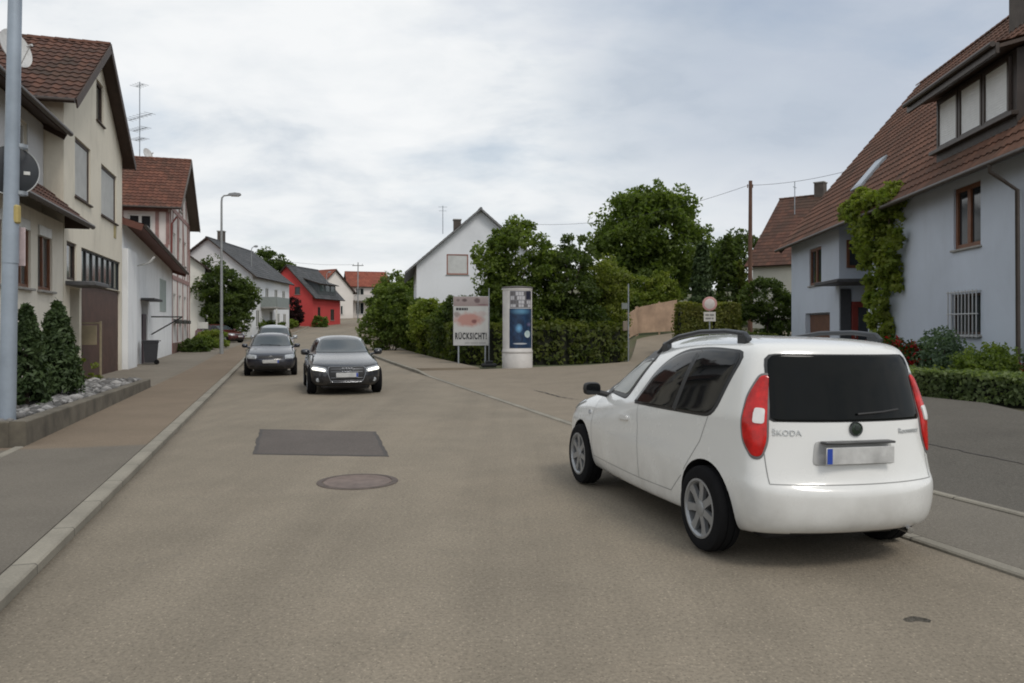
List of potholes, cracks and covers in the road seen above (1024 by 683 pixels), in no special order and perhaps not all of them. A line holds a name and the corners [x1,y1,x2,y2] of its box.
manhole cover [316,474,398,490]
